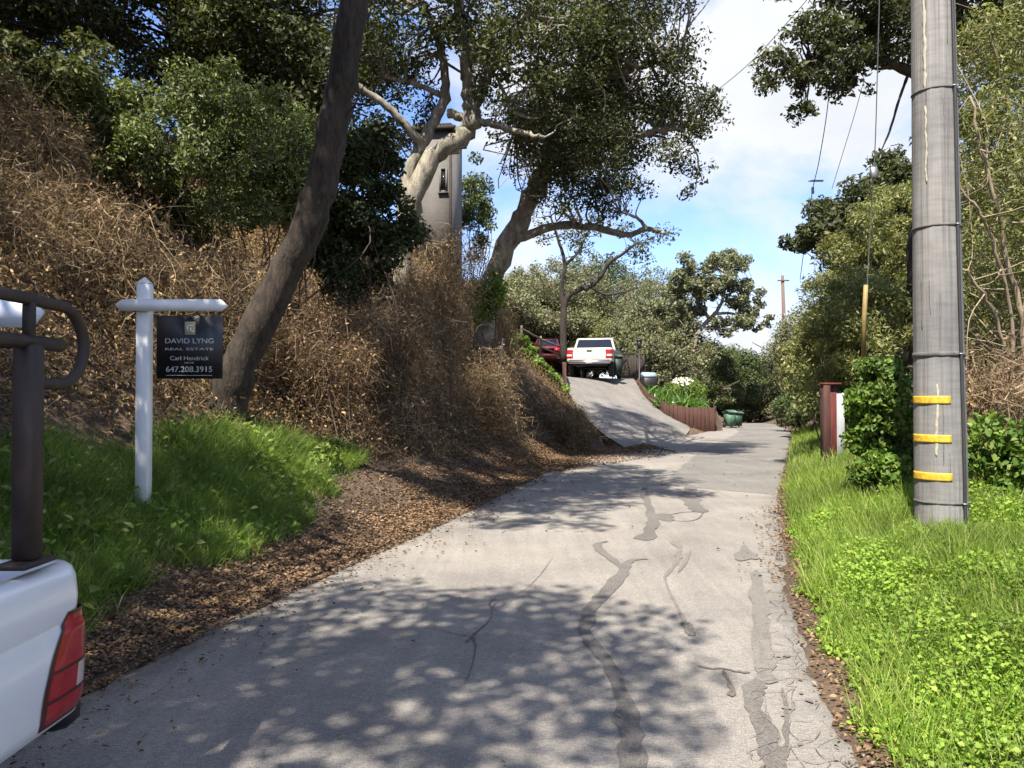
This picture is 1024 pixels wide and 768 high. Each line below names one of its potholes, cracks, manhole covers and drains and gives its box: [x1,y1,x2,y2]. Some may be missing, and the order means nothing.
crack [698,554,853,768]
crack [435,561,550,683]
